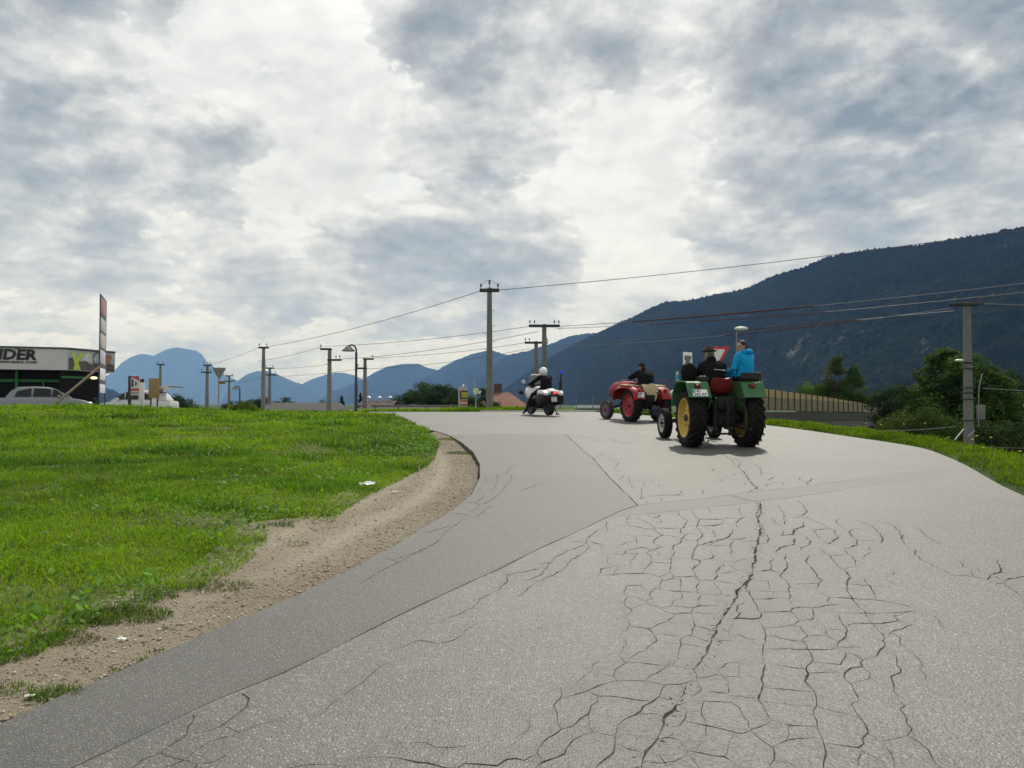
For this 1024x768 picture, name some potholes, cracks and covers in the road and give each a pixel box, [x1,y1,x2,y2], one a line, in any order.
crack [359,467,539,584]
crack [914,529,1024,594]
crack [712,454,812,501]
crack [132,694,280,768]
crack [369,502,939,768]
